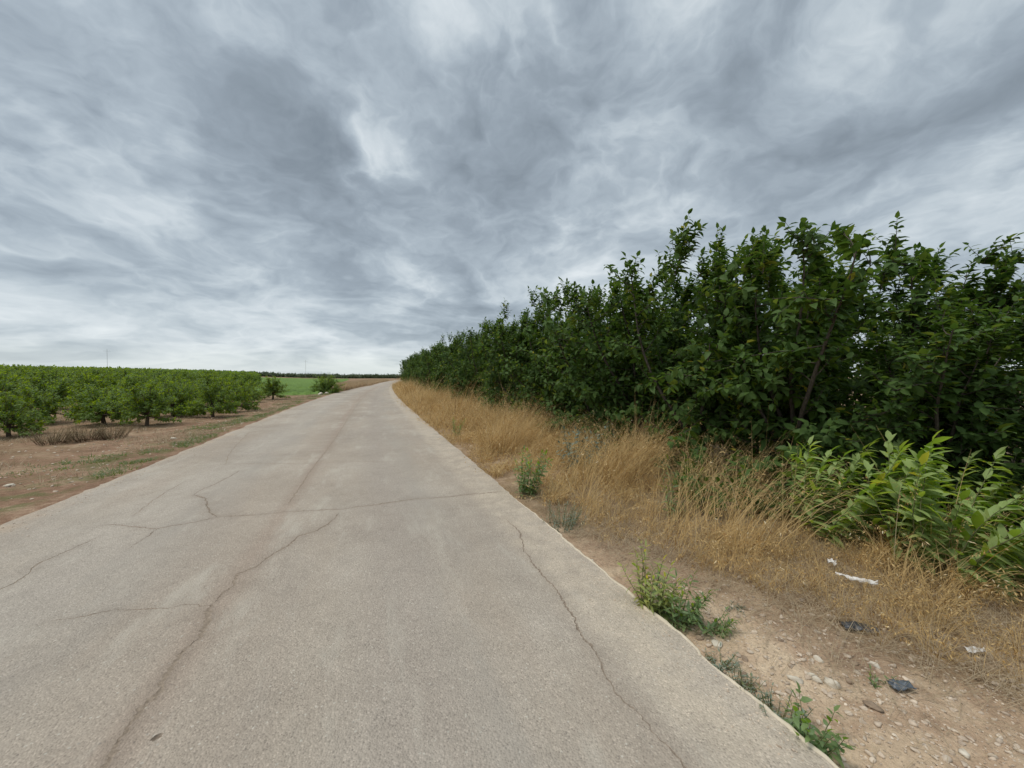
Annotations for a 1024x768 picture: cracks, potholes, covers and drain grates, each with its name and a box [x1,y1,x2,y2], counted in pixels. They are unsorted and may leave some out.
crack [506,519,686,768]
crack [1,540,91,589]
crack [54,475,501,768]
